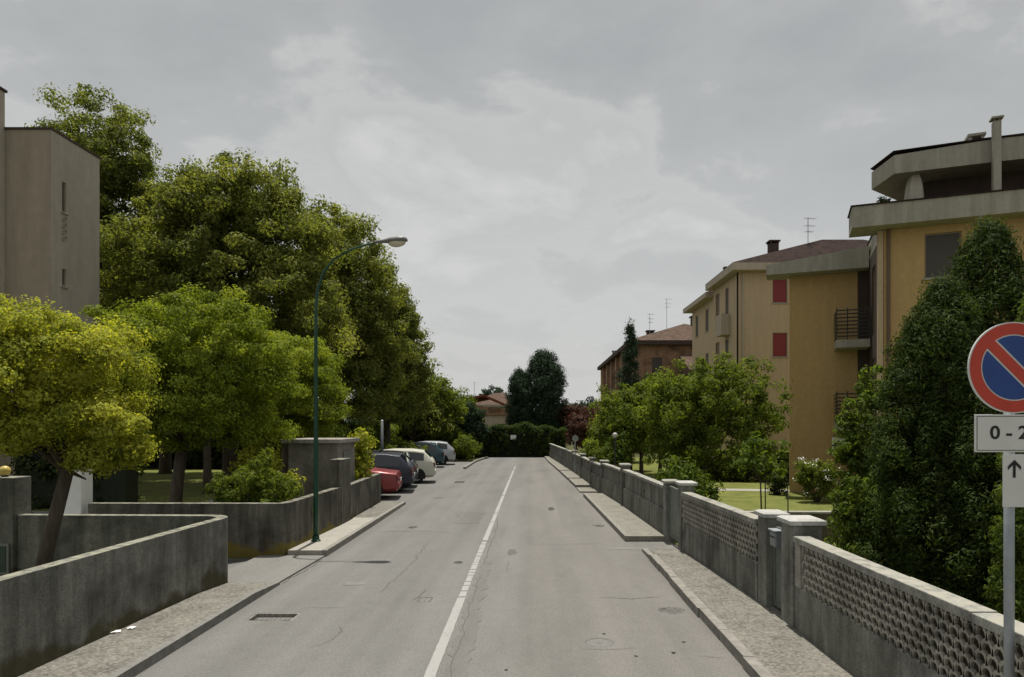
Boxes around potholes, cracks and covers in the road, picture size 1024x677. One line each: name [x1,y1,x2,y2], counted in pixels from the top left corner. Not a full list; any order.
manhole cover [583,637,617,647]
crack [450,522,498,677]
